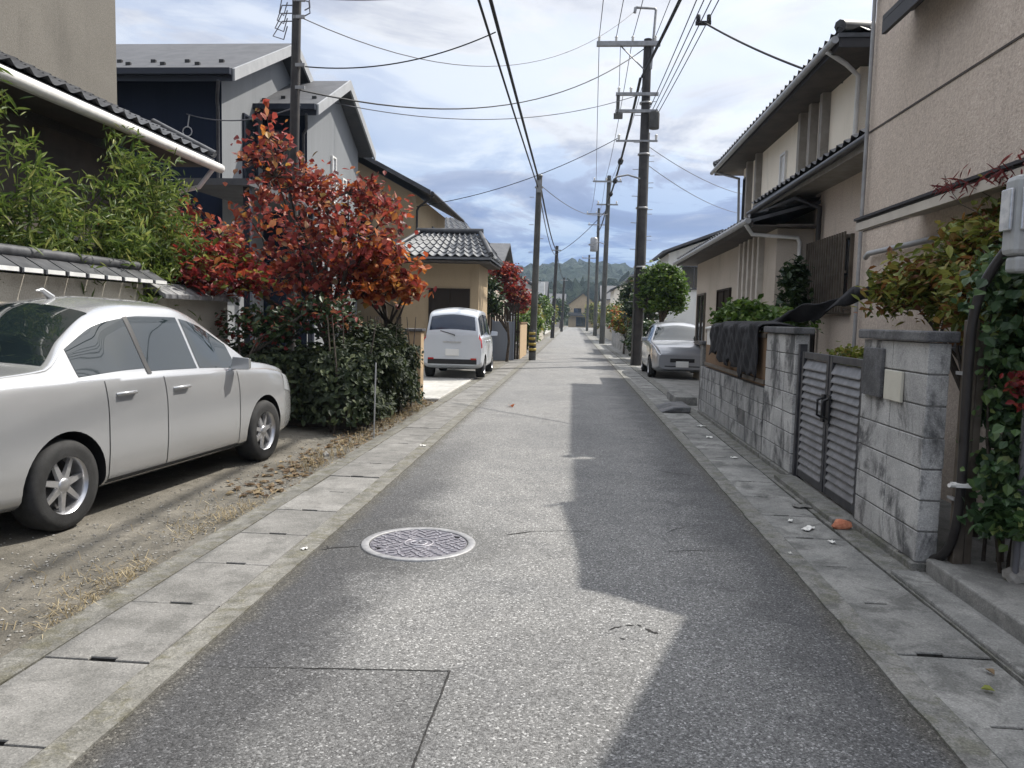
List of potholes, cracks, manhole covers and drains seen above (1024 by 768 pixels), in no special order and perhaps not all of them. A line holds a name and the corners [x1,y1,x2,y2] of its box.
manhole cover [361,527,476,562]
